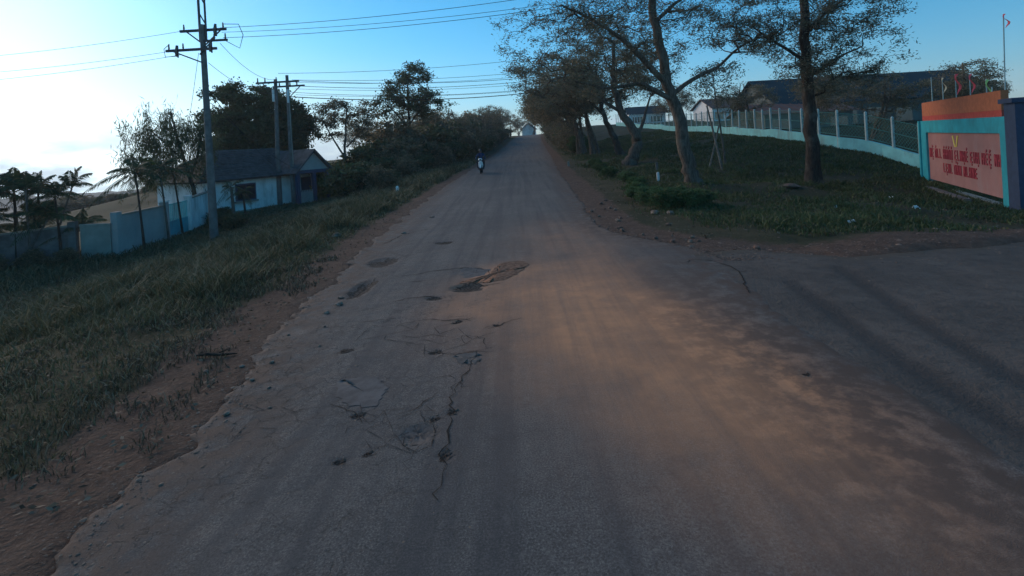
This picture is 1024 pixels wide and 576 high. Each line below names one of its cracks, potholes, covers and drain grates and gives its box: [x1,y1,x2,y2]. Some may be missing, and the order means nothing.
crack [331,318,515,500]
crack [688,259,750,293]
pothole [366,258,399,268]
pothole [347,280,379,300]
pothole [453,283,483,292]
